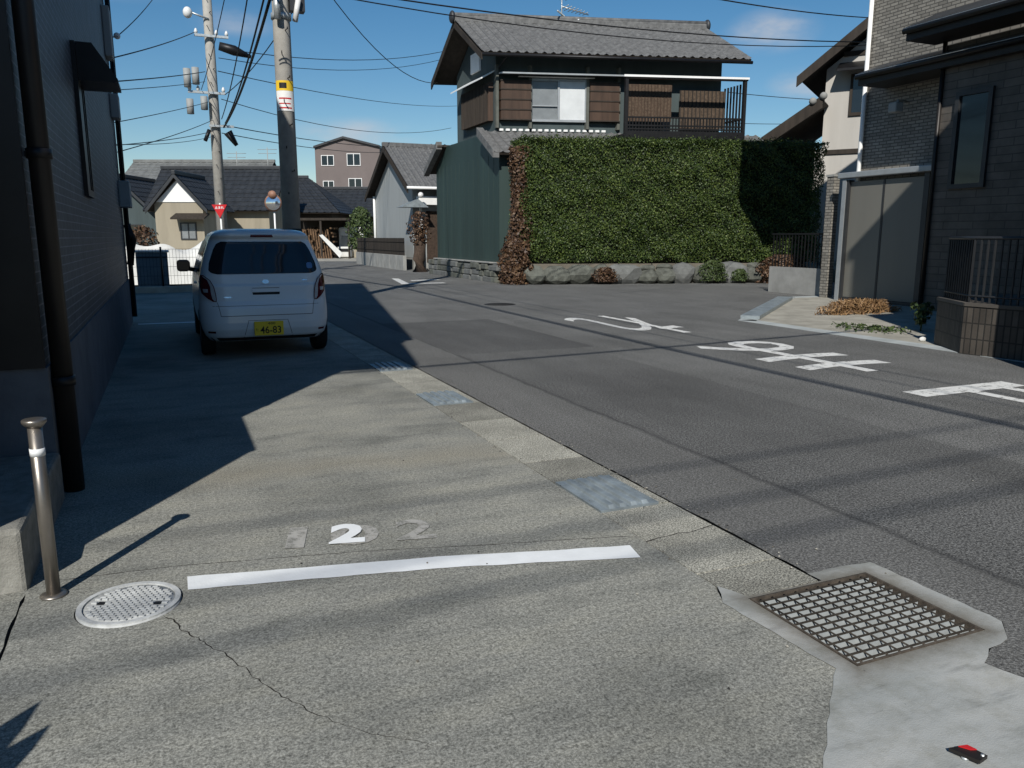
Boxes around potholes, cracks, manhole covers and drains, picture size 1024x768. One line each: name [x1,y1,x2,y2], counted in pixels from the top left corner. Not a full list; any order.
crack [164,616,428,744]
drain grate [750,572,983,666]
manhole cover [74,581,183,628]
